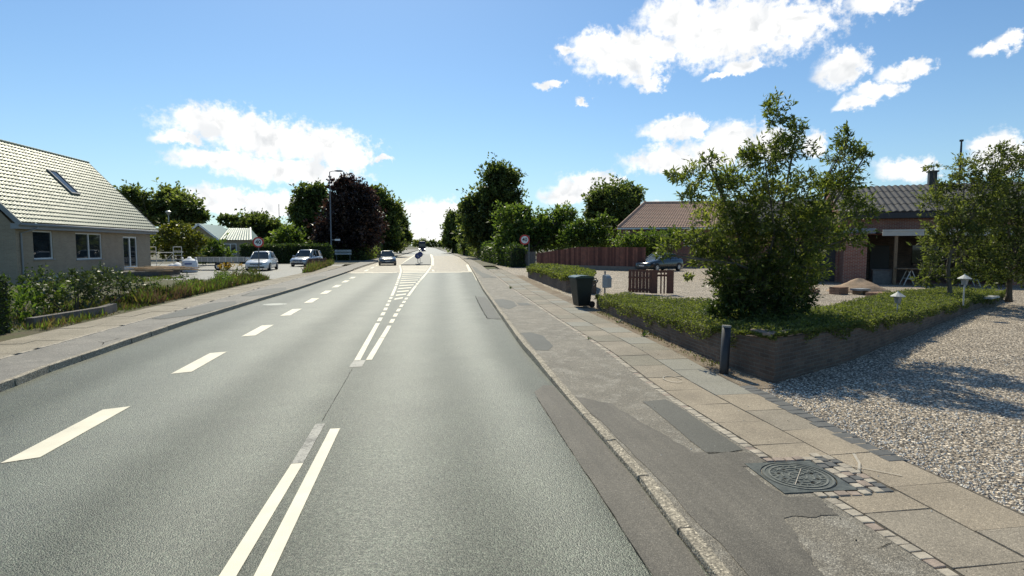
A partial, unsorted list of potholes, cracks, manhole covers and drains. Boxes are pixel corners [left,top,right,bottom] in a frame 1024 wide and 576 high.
manhole cover [744,461,858,494]
